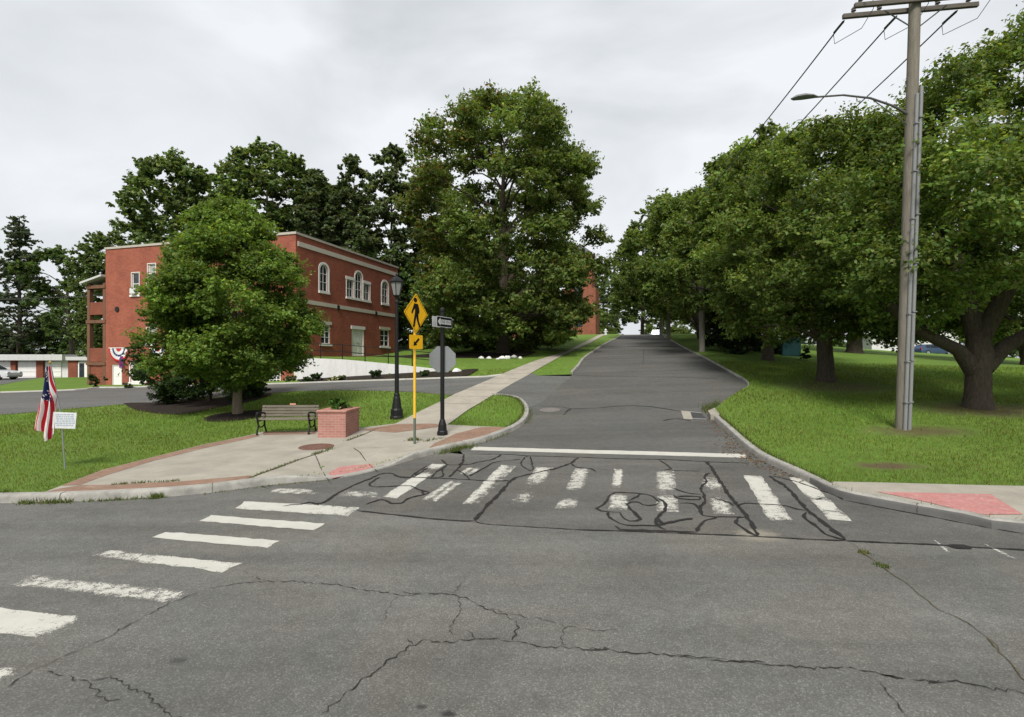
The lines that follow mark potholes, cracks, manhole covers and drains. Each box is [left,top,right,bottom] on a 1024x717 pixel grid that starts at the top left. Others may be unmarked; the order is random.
crack [854,544,1024,679]
crack [216,571,1023,713]
crack [8,593,195,717]
